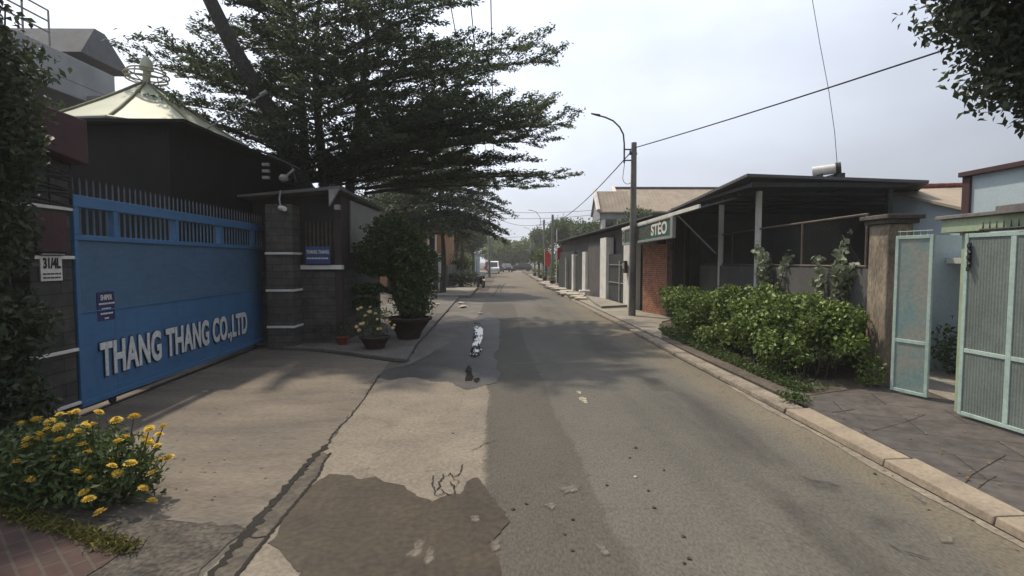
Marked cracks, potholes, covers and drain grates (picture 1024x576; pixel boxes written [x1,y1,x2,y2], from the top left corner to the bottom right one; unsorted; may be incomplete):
crack [431,442,487,496]
crack [207,444,331,576]
